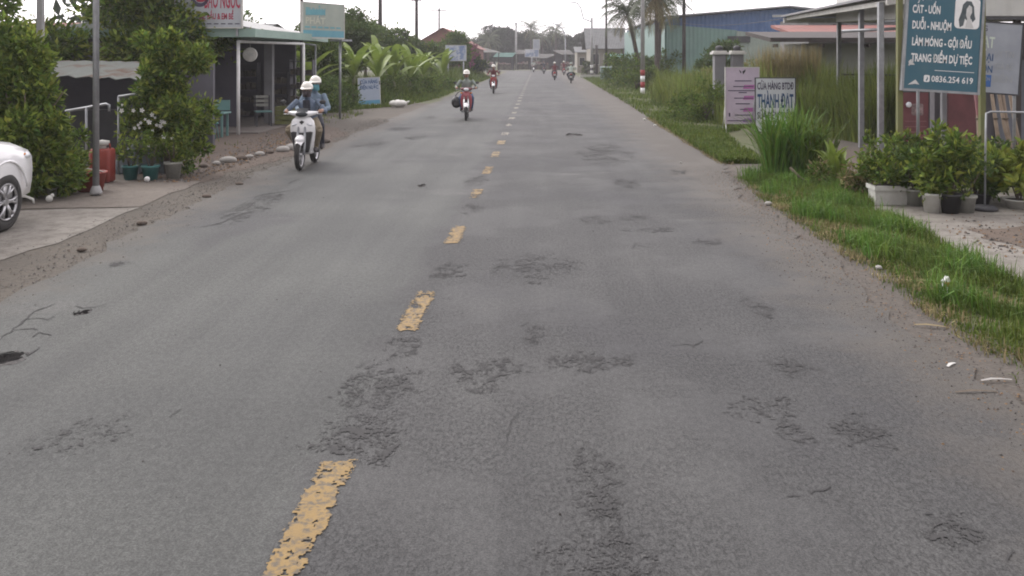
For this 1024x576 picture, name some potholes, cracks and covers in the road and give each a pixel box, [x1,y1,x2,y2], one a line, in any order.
pothole [0,350,30,366]
crack [203,179,304,227]
crack [1,303,55,356]
